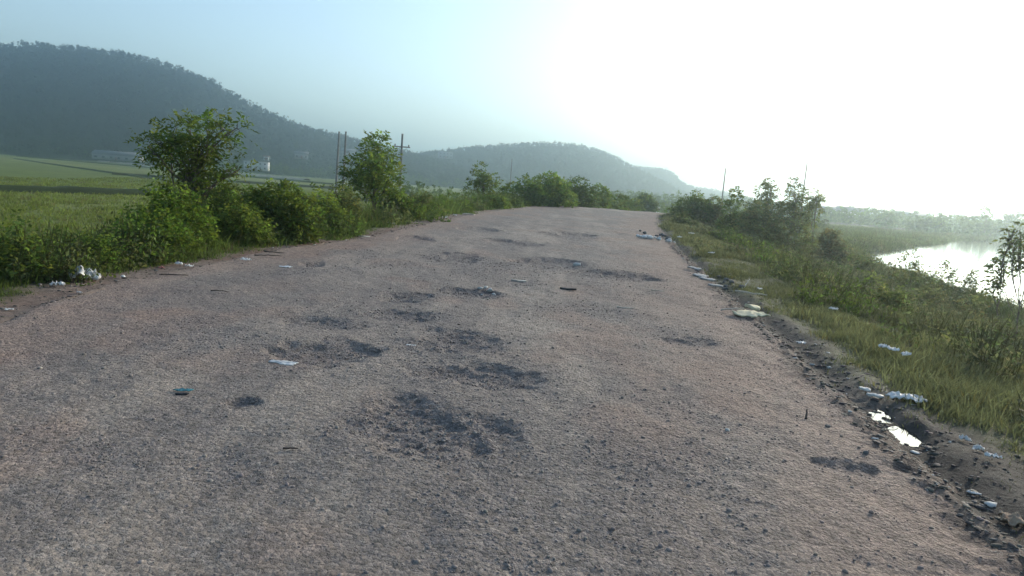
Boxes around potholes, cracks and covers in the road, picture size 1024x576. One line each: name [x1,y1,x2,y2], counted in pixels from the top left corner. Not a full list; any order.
pothole [379,292,435,303]
pothole [507,256,588,269]
pothole [567,269,666,282]
pothole [400,360,550,391]
pothole [365,308,443,323]
pothole [336,393,524,463]
pothole [388,327,511,357]
pothole [803,456,882,478]
pothole [229,397,265,407]
pothole [661,337,722,347]
pothole [264,338,392,368]
pothole [280,315,372,330]
